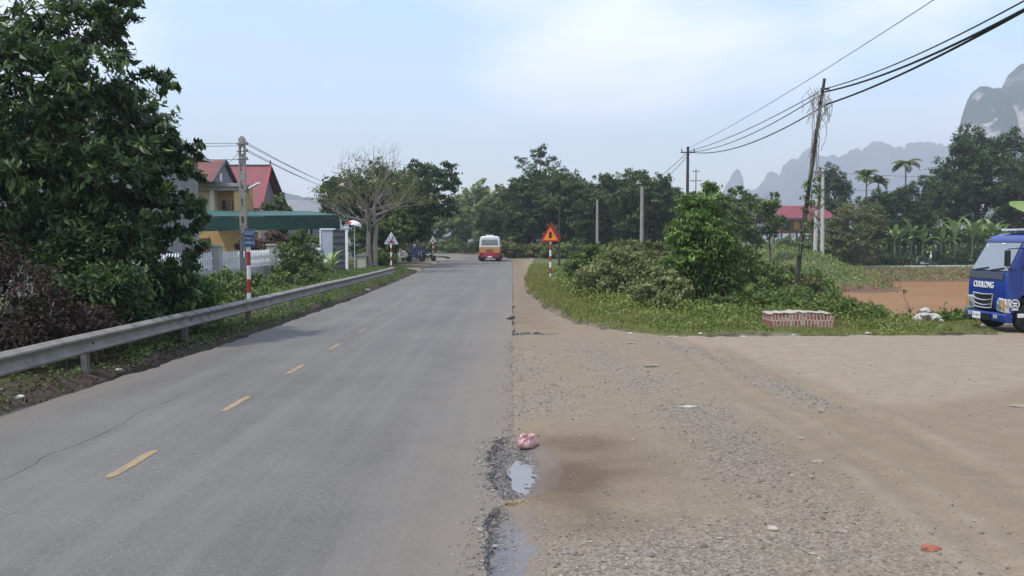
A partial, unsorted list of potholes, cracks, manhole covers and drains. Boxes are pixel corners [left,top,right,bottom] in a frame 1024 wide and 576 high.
pothole [483,505,550,576]
pothole [484,436,564,506]
